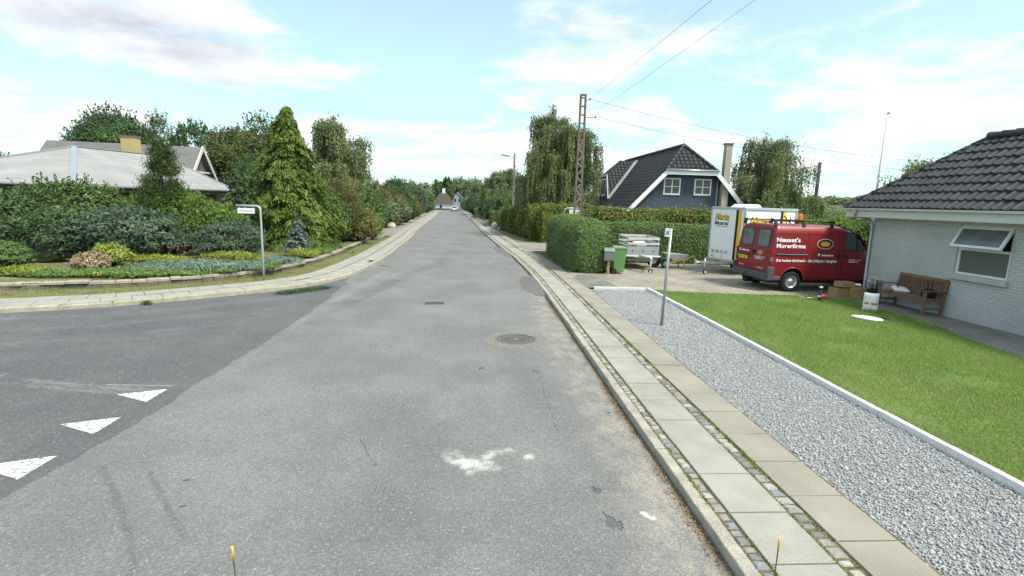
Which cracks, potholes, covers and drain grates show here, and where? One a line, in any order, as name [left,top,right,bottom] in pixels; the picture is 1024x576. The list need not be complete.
manhole cover [483,332,548,348]
